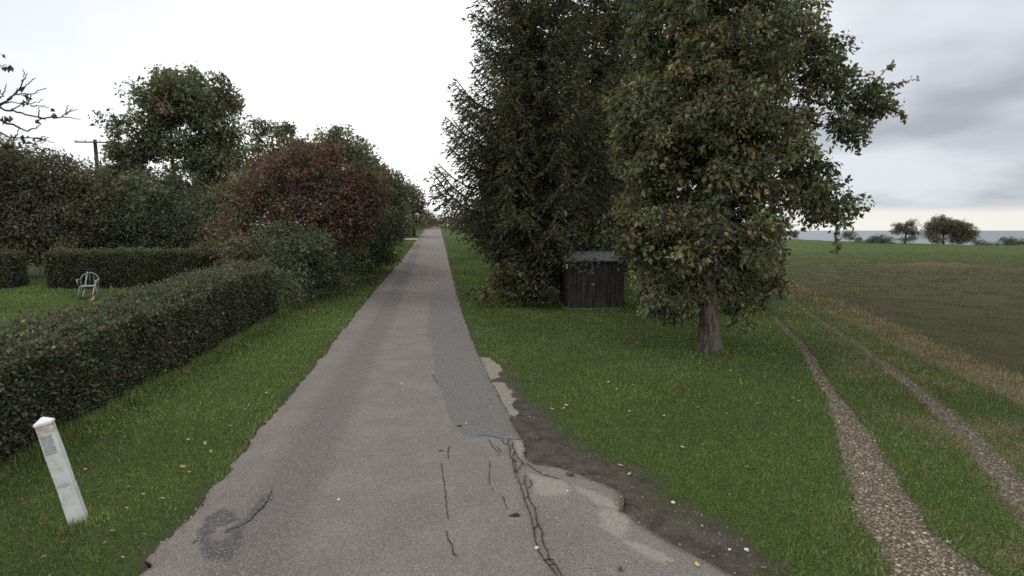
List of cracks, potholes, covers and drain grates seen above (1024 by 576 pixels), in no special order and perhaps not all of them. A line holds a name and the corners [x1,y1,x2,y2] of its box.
crack [192,491,272,545]
crack [481,435,562,576]
crack [441,447,458,557]
